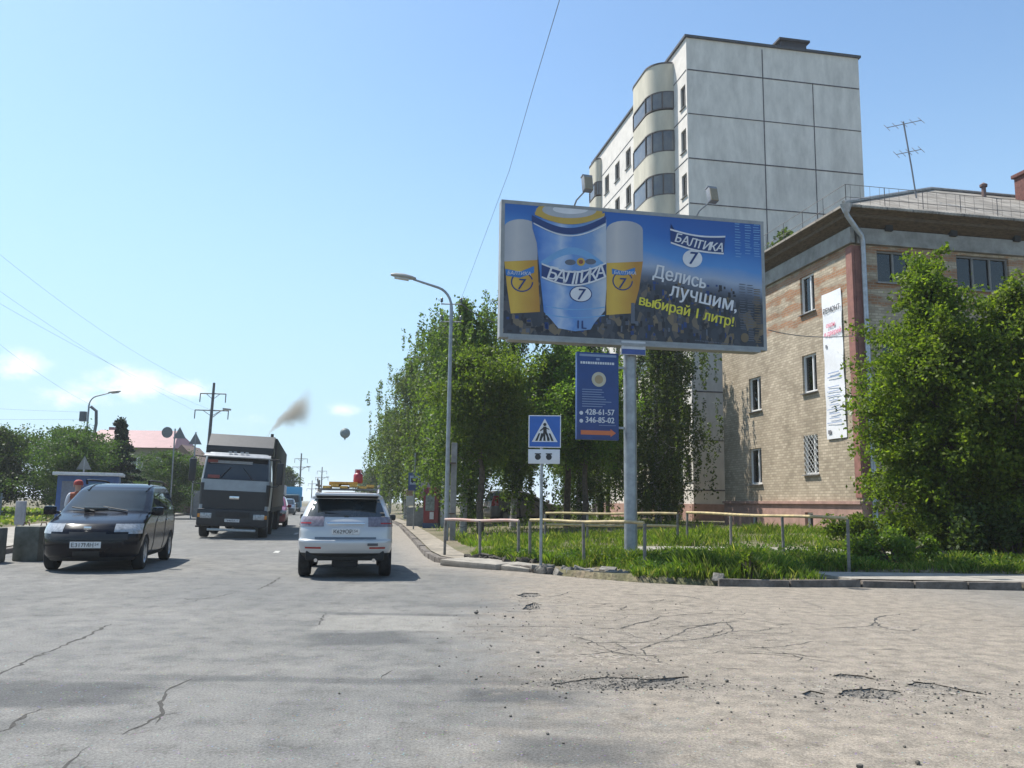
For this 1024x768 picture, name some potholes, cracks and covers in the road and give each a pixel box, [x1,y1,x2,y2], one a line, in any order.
crack [467,596,919,664]
crack [0,709,40,732]
pothole [908,682,991,695]
crack [123,678,192,734]
crack [0,624,111,674]
pothole [839,686,903,700]
pothole [551,676,688,691]
